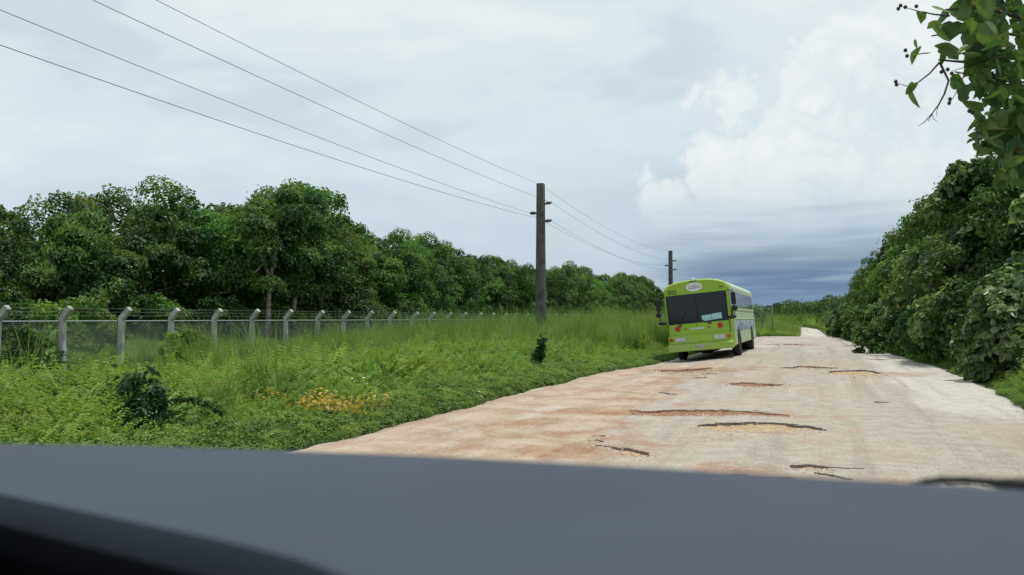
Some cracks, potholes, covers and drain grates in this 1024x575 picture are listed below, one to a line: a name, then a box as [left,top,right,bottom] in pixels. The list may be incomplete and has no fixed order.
pothole [629,409,790,417]
pothole [697,422,827,433]
pothole [592,445,652,457]
